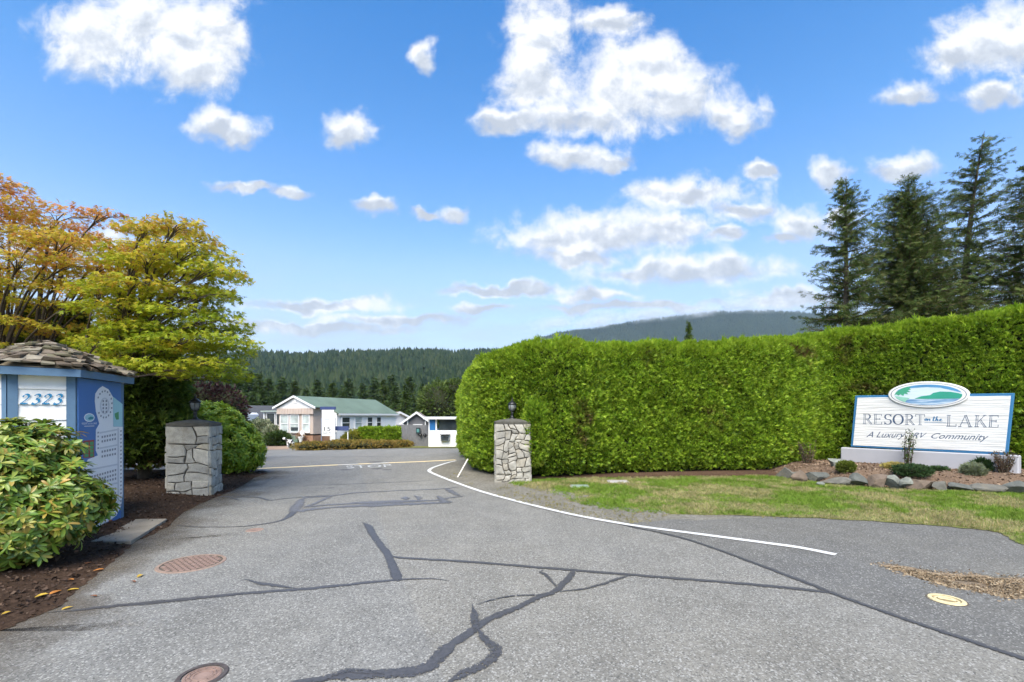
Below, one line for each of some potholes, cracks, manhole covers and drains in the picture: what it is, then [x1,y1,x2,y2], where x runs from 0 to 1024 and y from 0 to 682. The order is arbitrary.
manhole cover [154,554,227,574]
manhole cover [174,663,229,682]
manhole cover [925,593,970,606]
